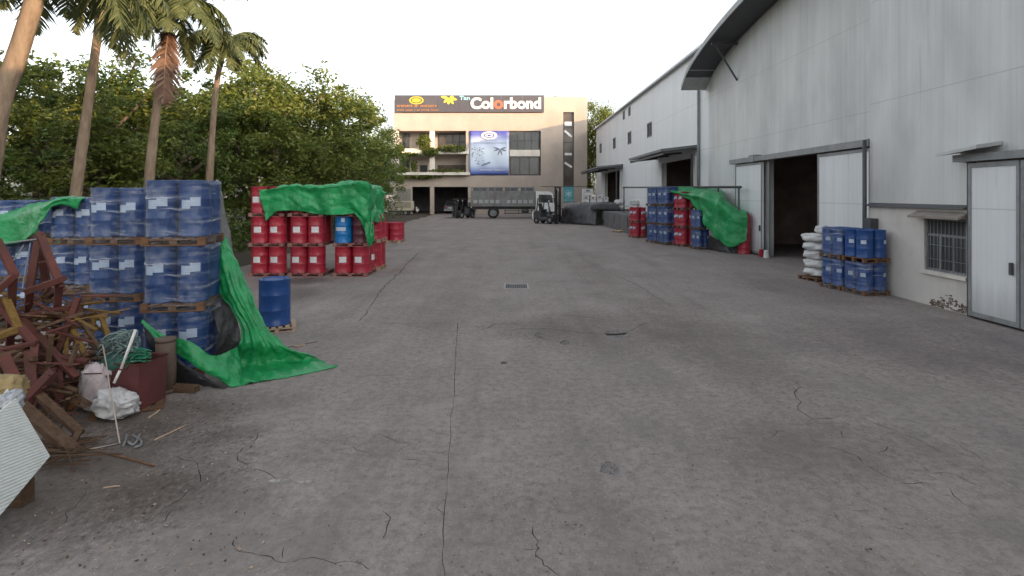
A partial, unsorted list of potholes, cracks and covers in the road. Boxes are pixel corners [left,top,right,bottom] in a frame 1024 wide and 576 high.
crack [526,525,559,576]
crack [771,379,977,518]
crack [202,432,276,484]
pothole [600,461,620,475]
crack [232,540,370,570]
